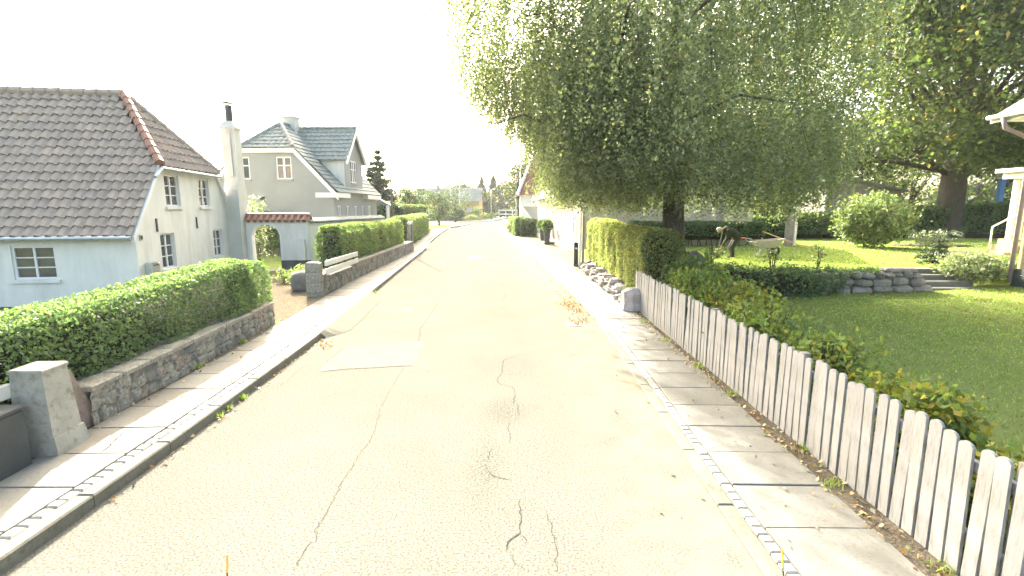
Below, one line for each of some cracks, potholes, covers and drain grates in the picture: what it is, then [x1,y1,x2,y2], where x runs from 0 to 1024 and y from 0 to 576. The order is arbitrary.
crack [502,500,527,571]
crack [294,369,447,572]
crack [497,344,520,450]
